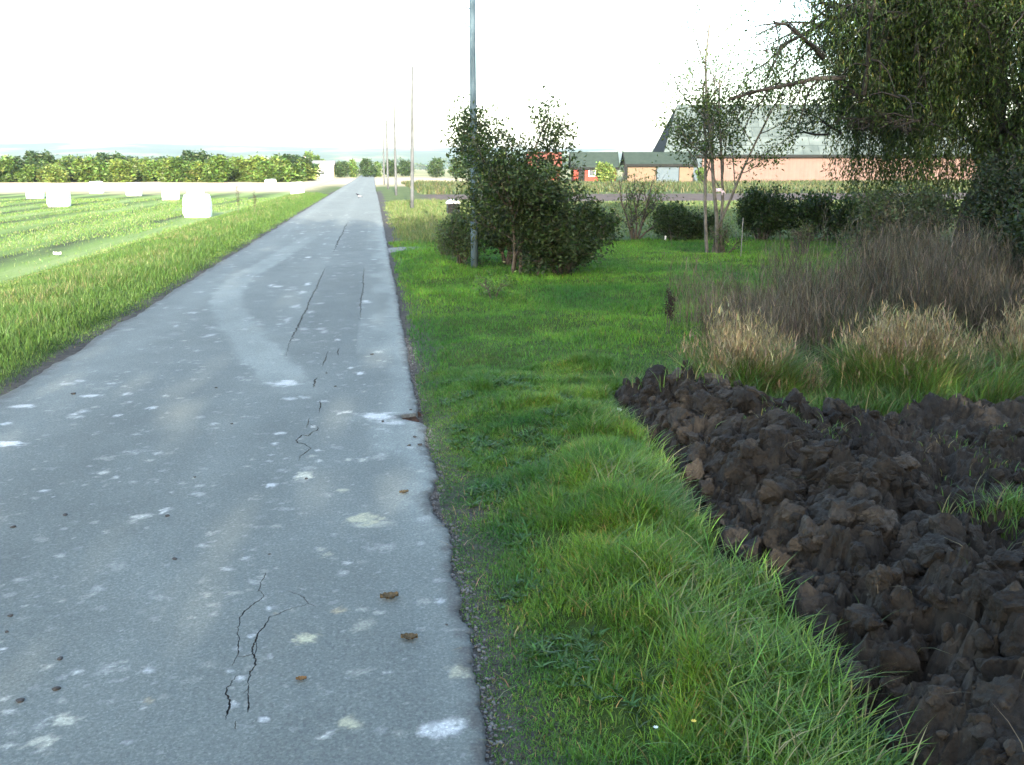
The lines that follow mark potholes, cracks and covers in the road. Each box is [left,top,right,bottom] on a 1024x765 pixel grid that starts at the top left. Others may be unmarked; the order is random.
crack [296,349,339,461]
crack [225,573,314,729]
